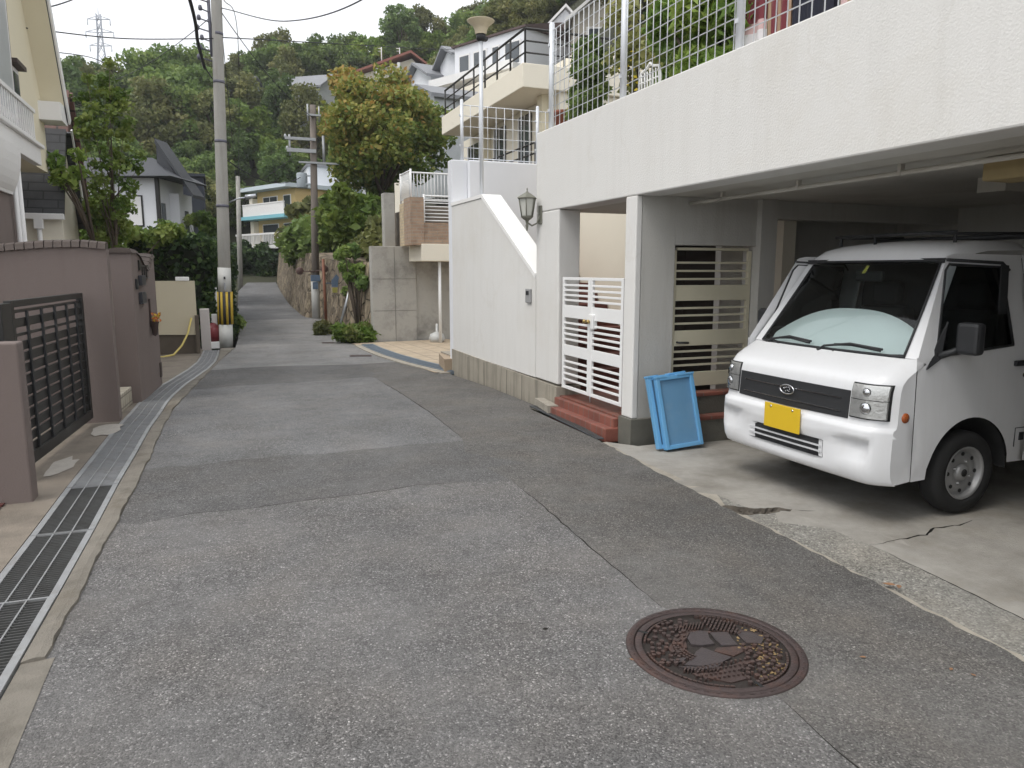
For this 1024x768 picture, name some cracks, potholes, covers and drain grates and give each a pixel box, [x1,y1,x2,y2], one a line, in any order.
drain grate [131,401,168,411]
drain grate [95,426,151,453]
drain grate [0,529,94,603]
drain grate [30,483,118,536]
drain grate [0,596,57,700]
drain grate [162,377,196,385]
drain grate [66,450,138,488]
drain grate [138,394,175,403]
drain grate [151,384,186,395]
drain grate [119,410,163,428]
crack [880,520,1024,620]
drain grate [173,369,208,378]
